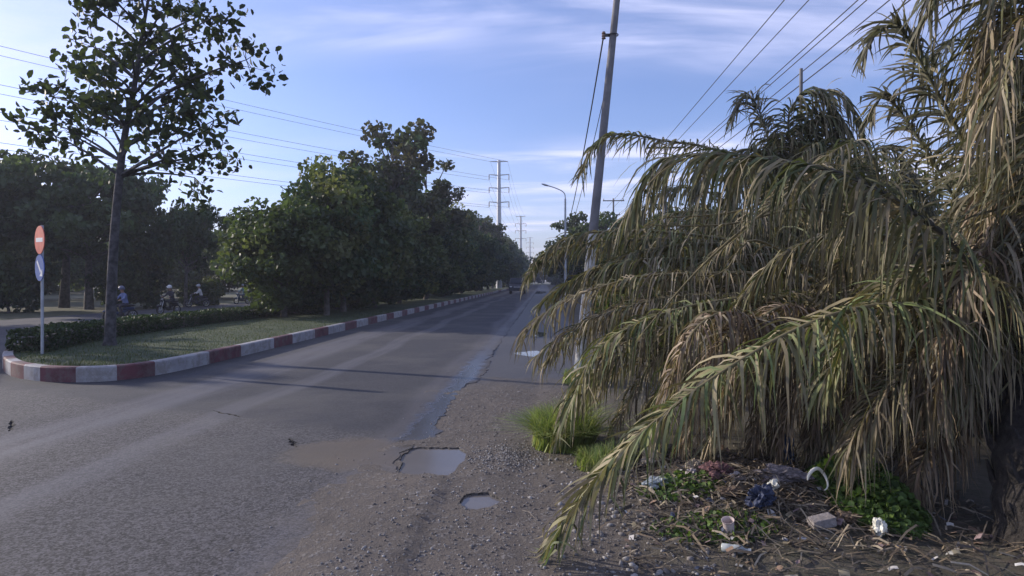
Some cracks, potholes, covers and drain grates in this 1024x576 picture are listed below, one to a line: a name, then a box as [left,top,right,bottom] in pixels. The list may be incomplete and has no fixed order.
pothole [459,492,501,503]
pothole [399,447,467,470]
